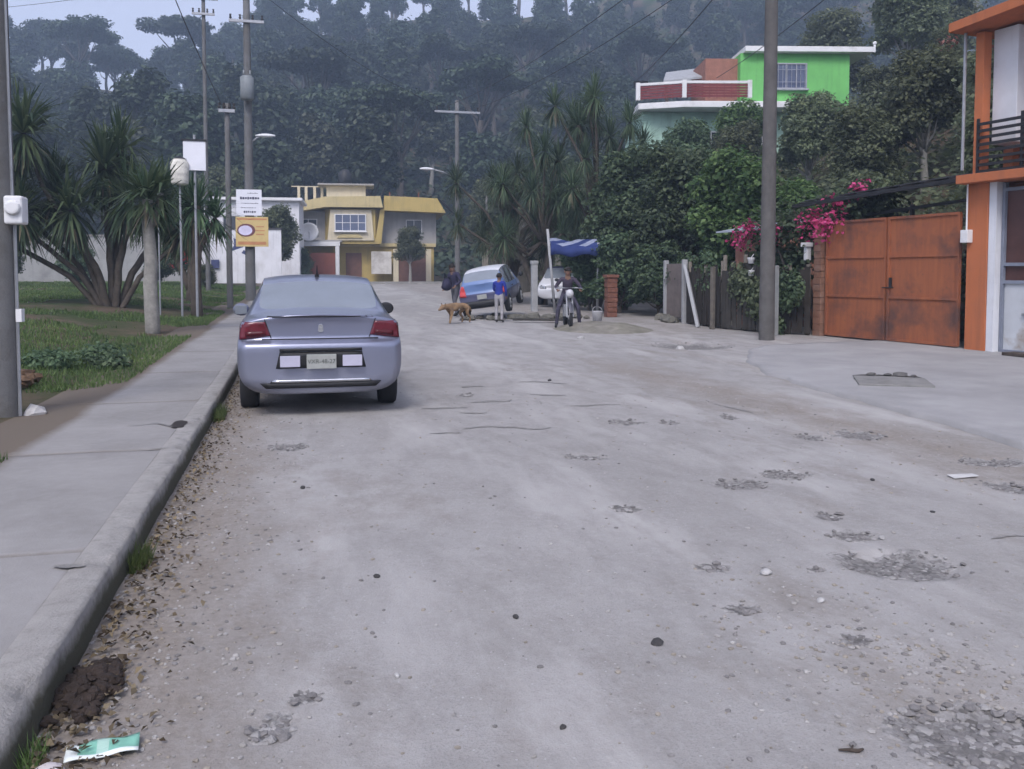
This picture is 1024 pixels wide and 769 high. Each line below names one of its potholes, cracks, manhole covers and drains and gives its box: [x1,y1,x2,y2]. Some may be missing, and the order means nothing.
pothole [982,481,1024,495]
pothole [758,469,818,480]
crack [522,381,617,406]
pothole [824,529,885,543]
pothole [958,457,1024,467]
pothole [608,504,643,513]
pothole [814,511,845,521]
pothole [826,548,966,582]
pothole [880,700,1024,769]
pothole [721,603,762,616]
pothole [826,429,888,440]
crack [422,386,551,434]
